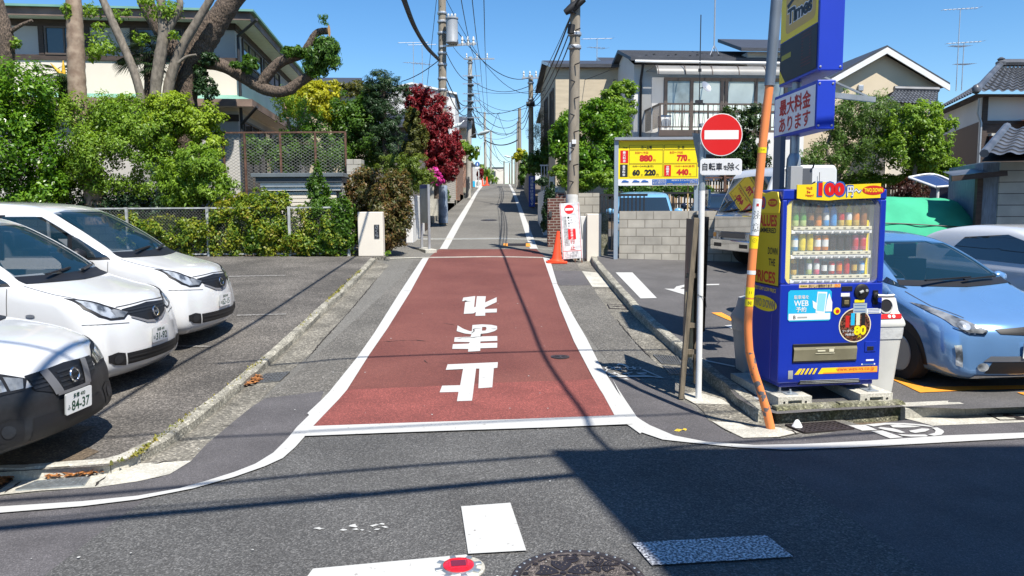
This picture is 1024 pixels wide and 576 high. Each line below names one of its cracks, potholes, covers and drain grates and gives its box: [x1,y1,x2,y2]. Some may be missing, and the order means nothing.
drain grate [256,371,290,384]
drain grate [653,354,681,365]
manhole cover [511,550,644,576]
drain grate [785,421,855,434]
drain grate [15,476,90,491]
